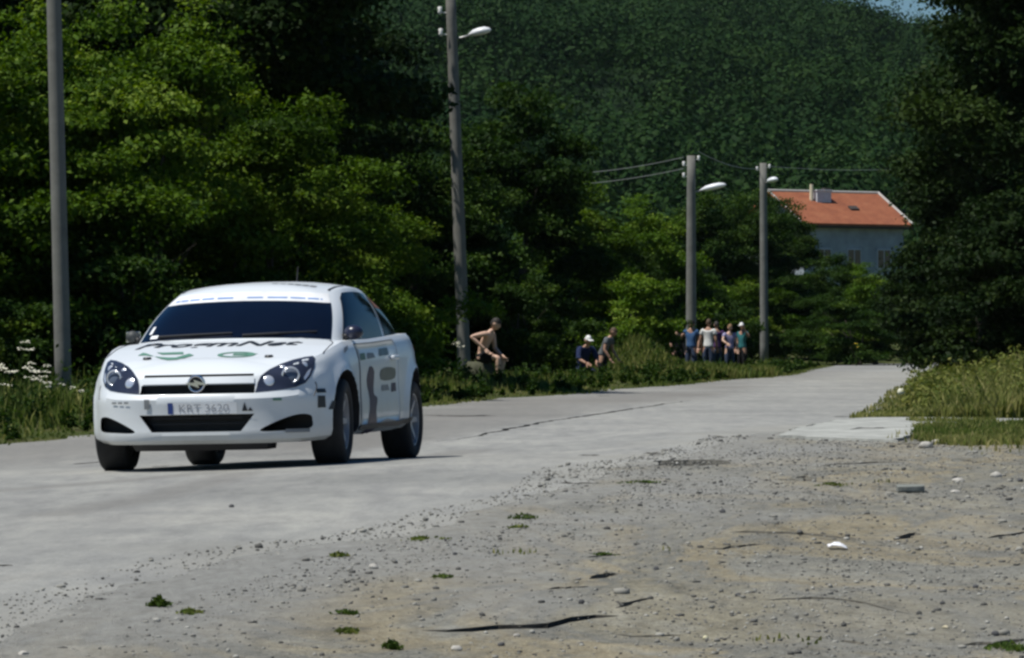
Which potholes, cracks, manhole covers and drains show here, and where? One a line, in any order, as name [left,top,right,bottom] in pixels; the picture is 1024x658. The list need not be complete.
crack [770,597,912,615]
crack [423,598,679,637]
crack [550,554,618,589]
crack [893,532,921,540]
